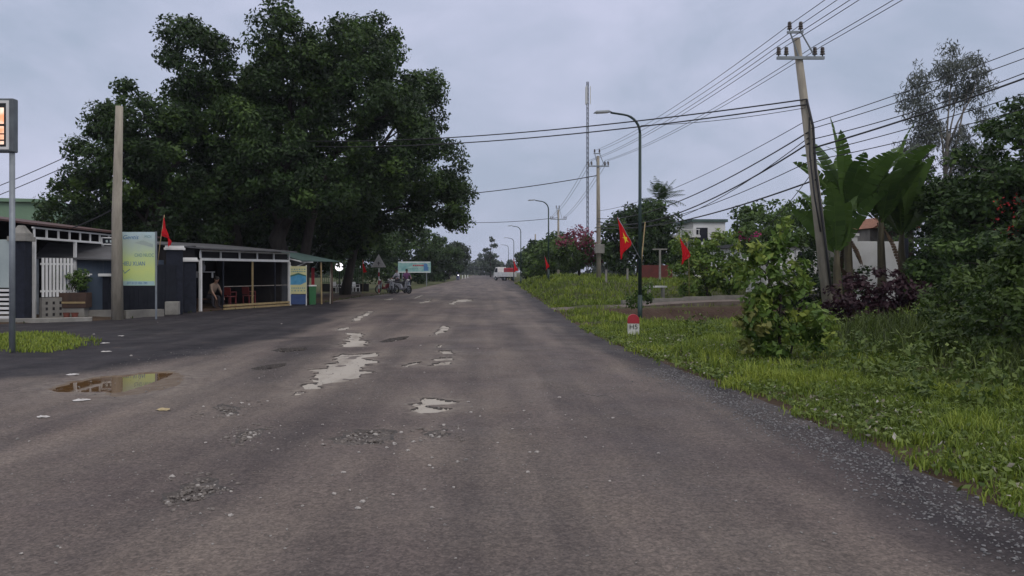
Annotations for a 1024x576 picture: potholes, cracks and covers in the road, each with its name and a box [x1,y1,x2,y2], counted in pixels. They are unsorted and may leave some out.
pothole [305,425,414,448]
pothole [408,397,459,413]
pothole [210,423,285,447]
pothole [410,424,465,442]
pothole [300,352,382,390]
pothole [334,332,371,347]
pothole [47,371,185,397]
pothole [124,471,255,512]
